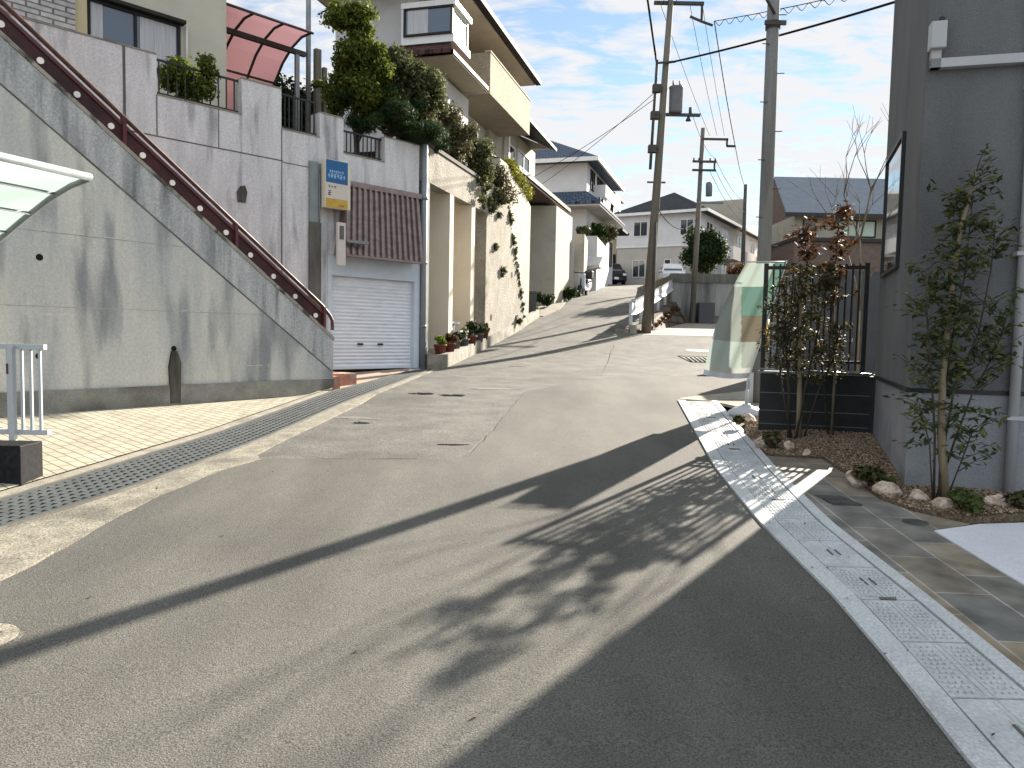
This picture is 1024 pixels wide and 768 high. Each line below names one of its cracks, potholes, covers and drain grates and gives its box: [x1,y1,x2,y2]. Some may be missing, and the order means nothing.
manhole cover [0,623,25,649]
drain grate [0,368,431,530]
manhole cover [815,495,862,506]
